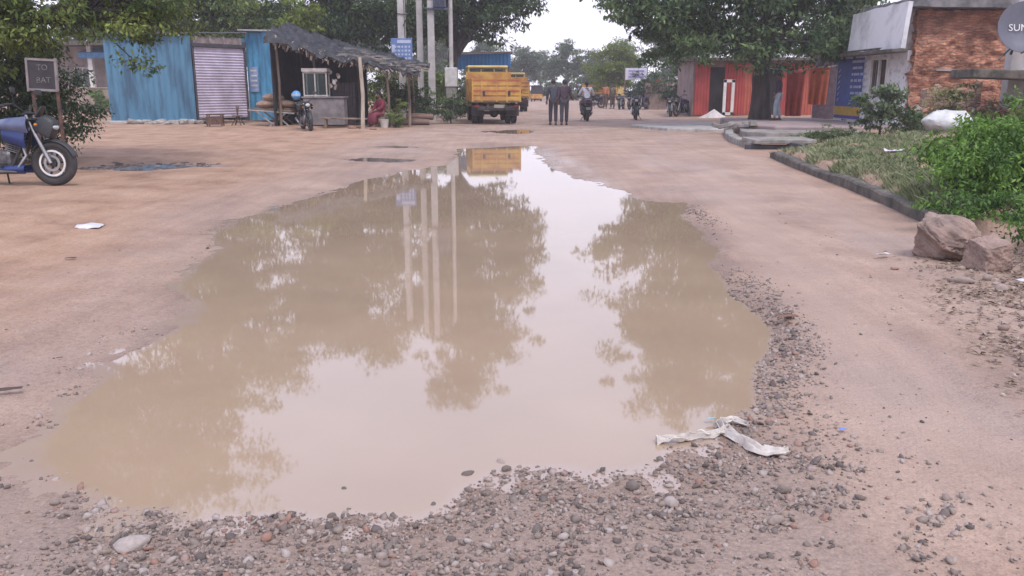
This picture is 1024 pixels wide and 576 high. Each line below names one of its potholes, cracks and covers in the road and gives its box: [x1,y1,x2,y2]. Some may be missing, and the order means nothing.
pothole [0,144,795,545]
